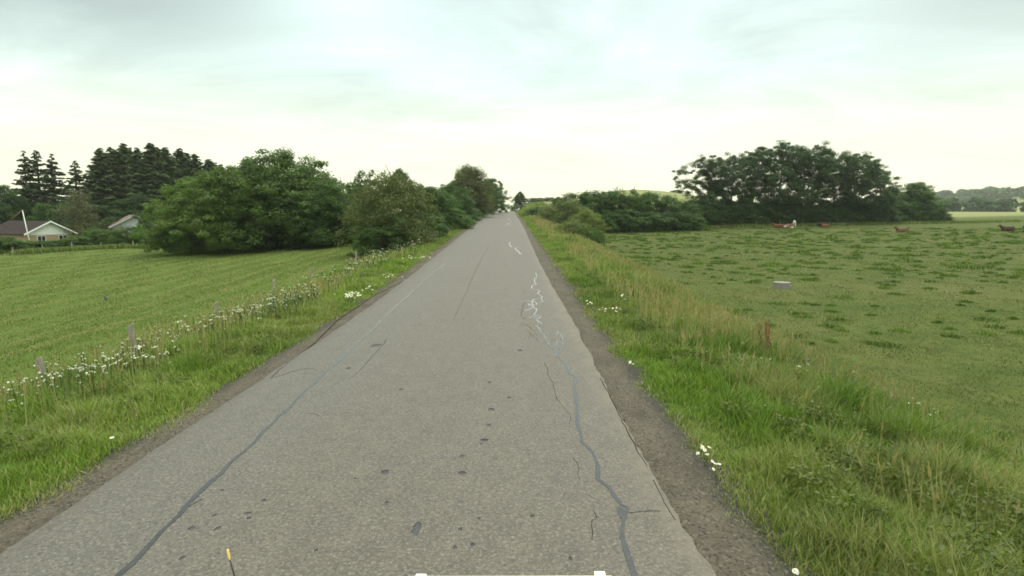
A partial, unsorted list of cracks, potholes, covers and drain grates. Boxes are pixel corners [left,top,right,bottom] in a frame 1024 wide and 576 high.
crack [271,282,402,378]
crack [600,378,675,520]
